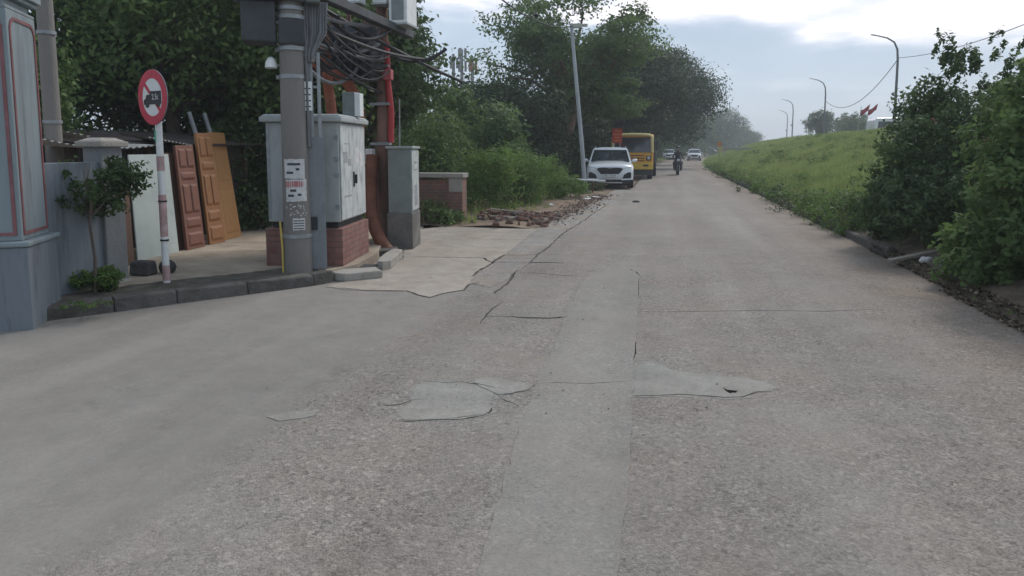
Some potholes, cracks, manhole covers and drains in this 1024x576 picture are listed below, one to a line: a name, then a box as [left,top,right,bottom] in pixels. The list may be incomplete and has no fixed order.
crack [327,254,585,323]
